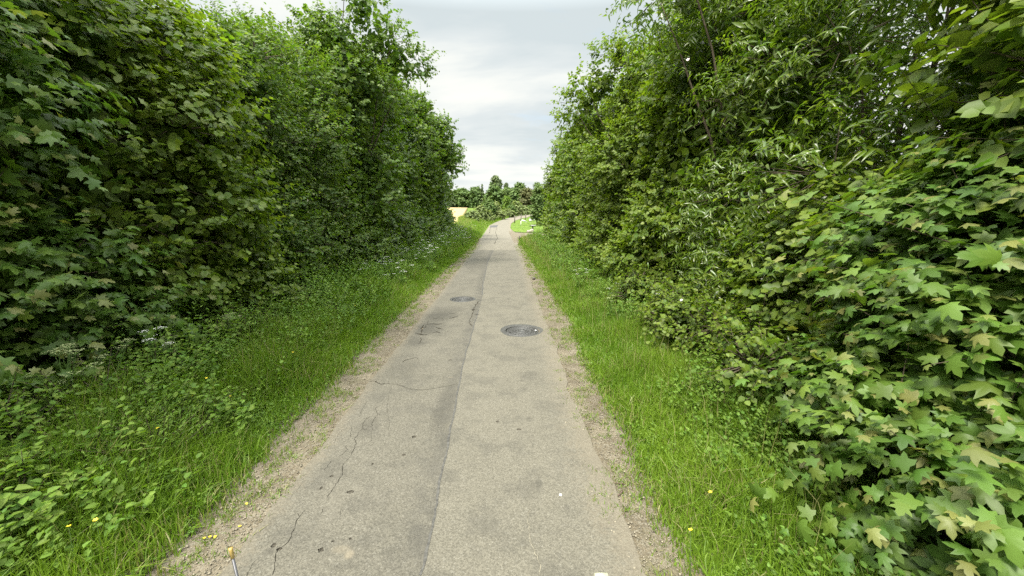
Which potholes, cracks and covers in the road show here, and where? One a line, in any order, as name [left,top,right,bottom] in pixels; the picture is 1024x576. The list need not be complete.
crack [247,381,457,575]
crack [403,302,478,362]
manhole cover [500,324,543,337]
